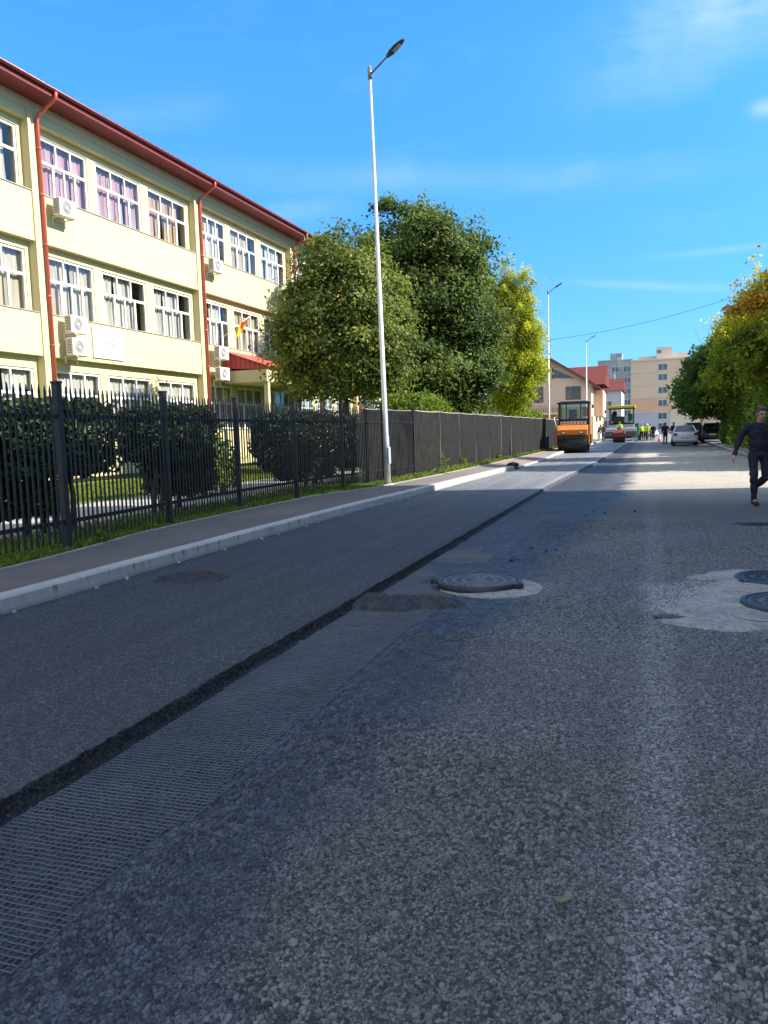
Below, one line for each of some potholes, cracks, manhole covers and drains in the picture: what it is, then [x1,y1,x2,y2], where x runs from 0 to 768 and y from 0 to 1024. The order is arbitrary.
manhole cover [740,592,768,612]
manhole cover [430,572,524,593]
manhole cover [734,569,768,585]
